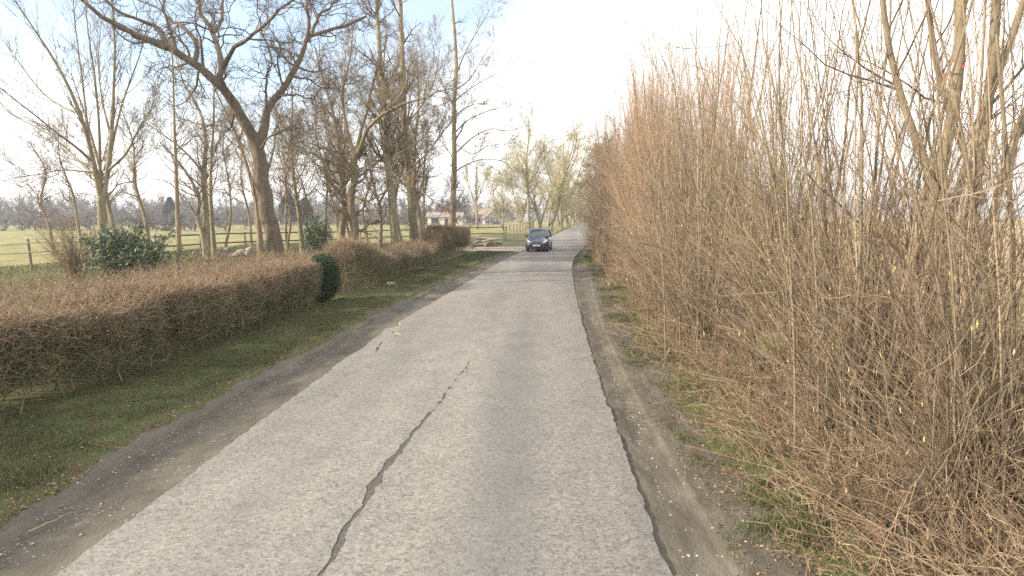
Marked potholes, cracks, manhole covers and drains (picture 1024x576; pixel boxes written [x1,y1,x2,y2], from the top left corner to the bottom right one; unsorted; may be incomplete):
crack [318,362,469,576]
